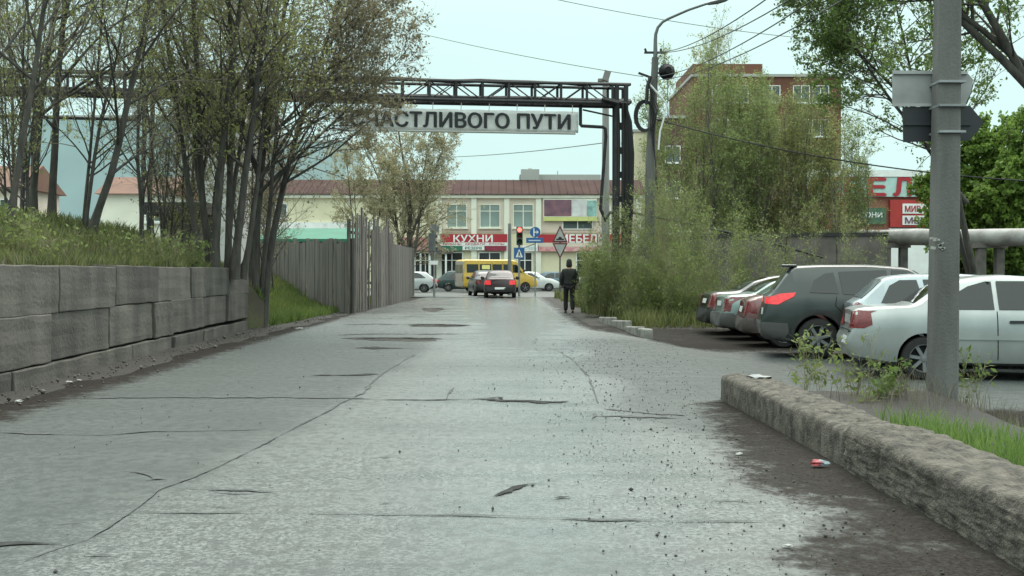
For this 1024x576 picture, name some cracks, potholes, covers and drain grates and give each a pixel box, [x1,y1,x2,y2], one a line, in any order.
crack [561,352,683,418]
crack [138,487,763,521]
crack [0,541,109,556]
crack [102,387,567,403]
